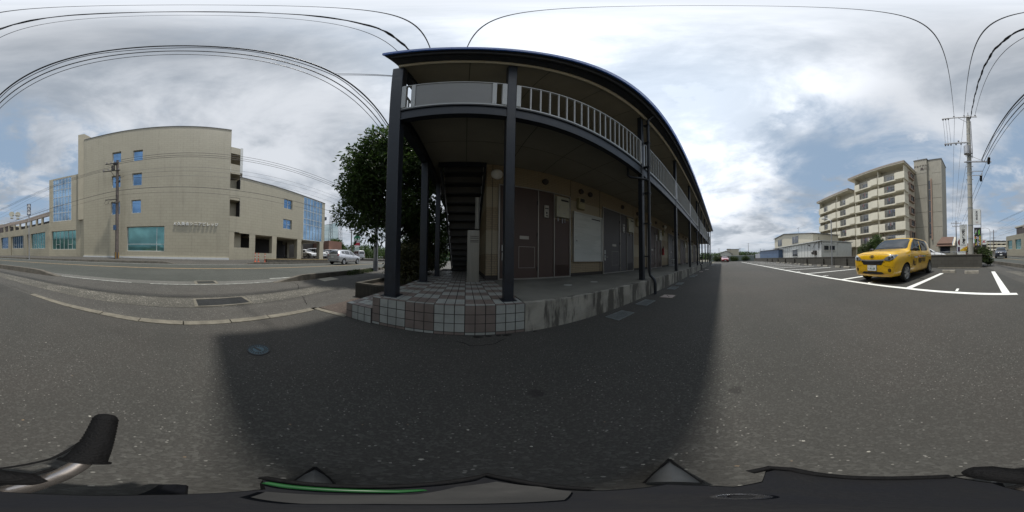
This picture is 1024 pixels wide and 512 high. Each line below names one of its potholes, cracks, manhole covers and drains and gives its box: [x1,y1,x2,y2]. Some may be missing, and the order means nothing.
drain grate [193,296,253,307]
manhole cover [247,344,270,356]
utility cover [606,310,634,321]
